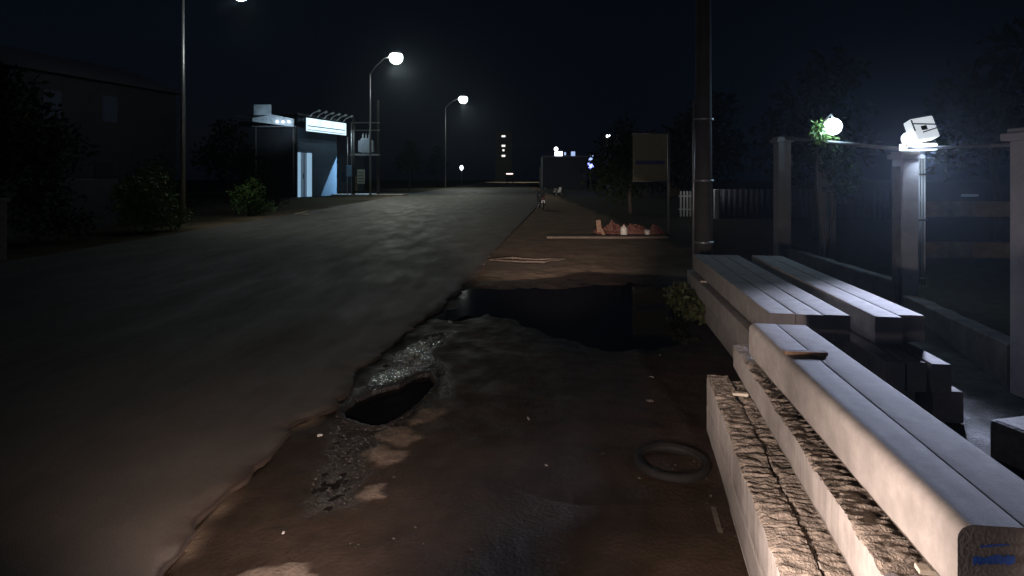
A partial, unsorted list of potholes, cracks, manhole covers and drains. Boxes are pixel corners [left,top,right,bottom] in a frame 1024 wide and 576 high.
pothole [335,371,440,431]
